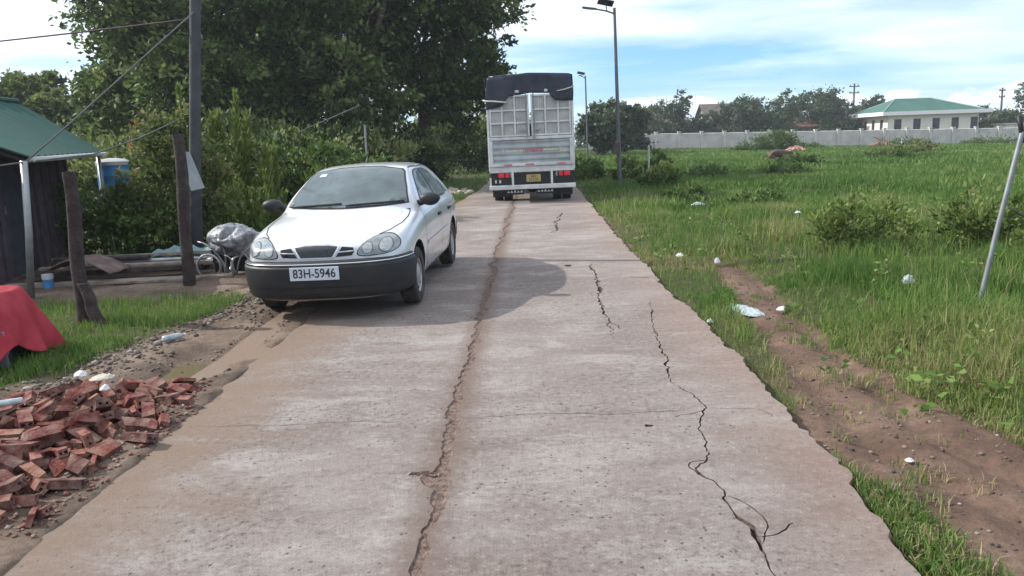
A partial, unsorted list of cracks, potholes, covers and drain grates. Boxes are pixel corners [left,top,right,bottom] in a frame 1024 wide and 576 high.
crack [196,195,793,576]
